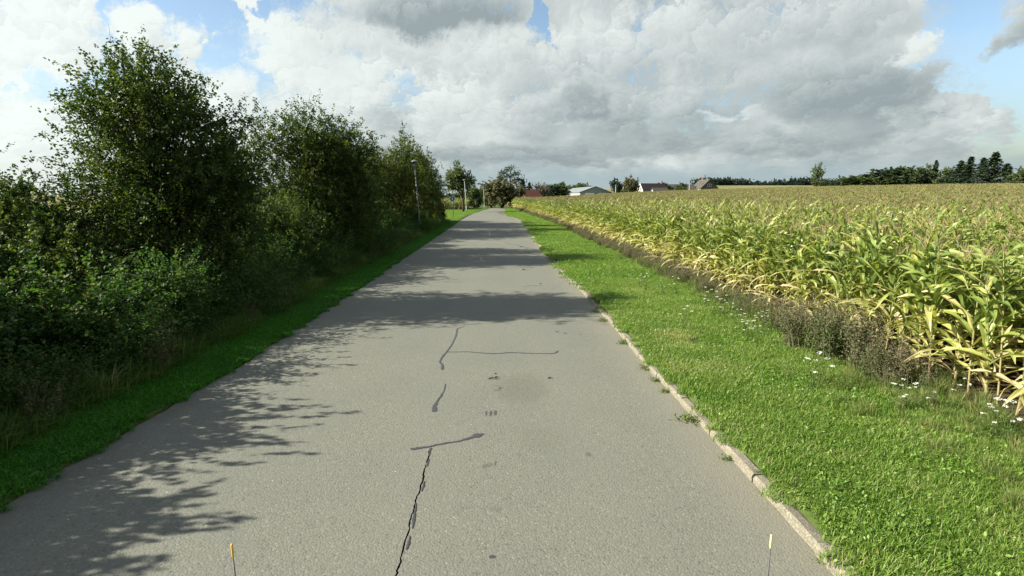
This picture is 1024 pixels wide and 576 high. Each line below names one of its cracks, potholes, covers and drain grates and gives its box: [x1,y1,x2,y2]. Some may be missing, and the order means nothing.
crack [395,433,484,576]
